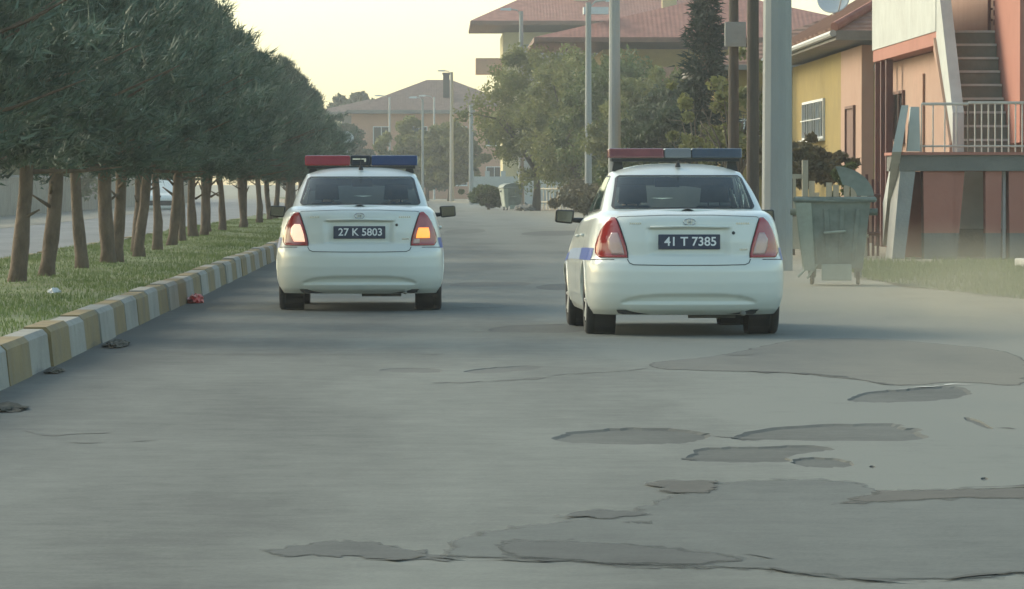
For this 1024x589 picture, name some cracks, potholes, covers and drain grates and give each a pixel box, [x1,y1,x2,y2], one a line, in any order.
pothole [791,457,854,468]
pothole [682,445,835,463]
crack [937,571,1024,580]
crack [735,553,920,582]
pothole [551,427,711,445]
crack [25,430,151,443]
pothole [730,423,929,441]
crack [434,368,644,383]
pothole [847,386,972,403]
